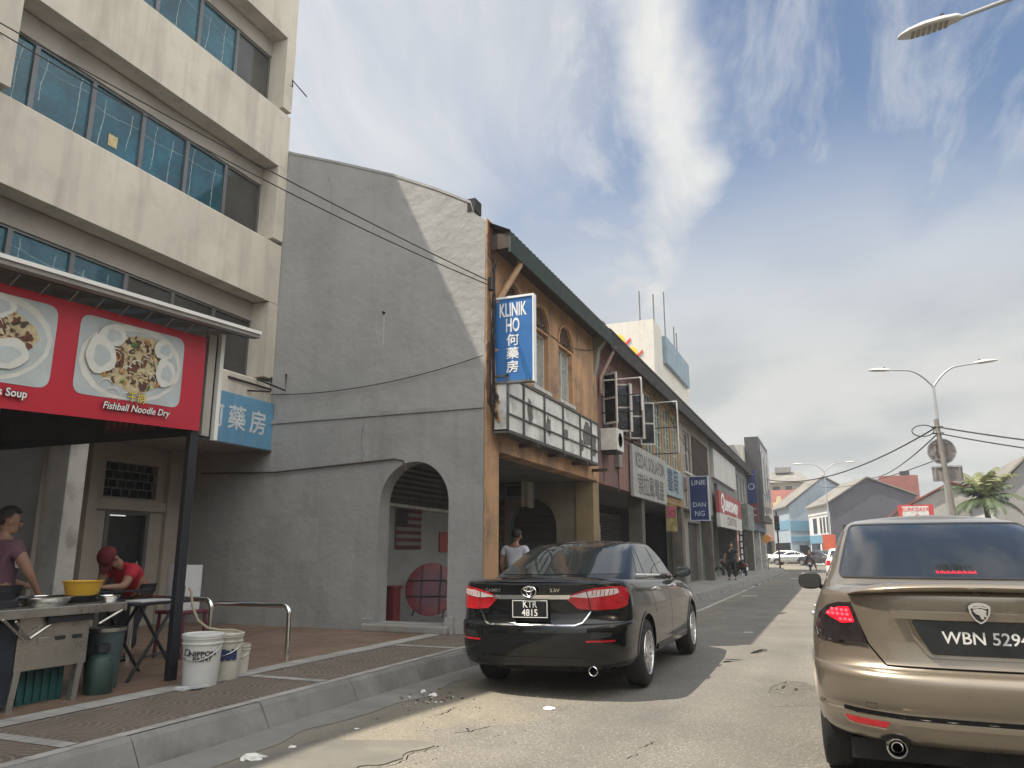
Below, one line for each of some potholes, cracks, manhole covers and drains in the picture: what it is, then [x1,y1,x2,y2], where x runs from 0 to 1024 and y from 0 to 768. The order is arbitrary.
pothole [768,681,816,696]
